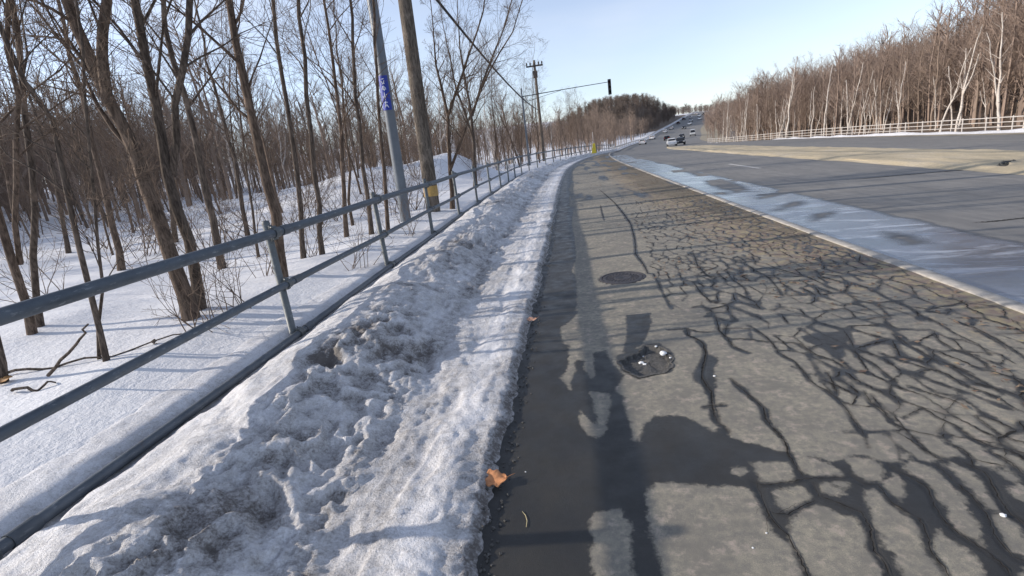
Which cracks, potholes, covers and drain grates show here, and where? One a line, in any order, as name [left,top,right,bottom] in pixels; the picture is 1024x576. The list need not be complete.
pothole [616,344,675,378]
crack [599,189,1024,576]
manhole cover [599,271,646,285]
